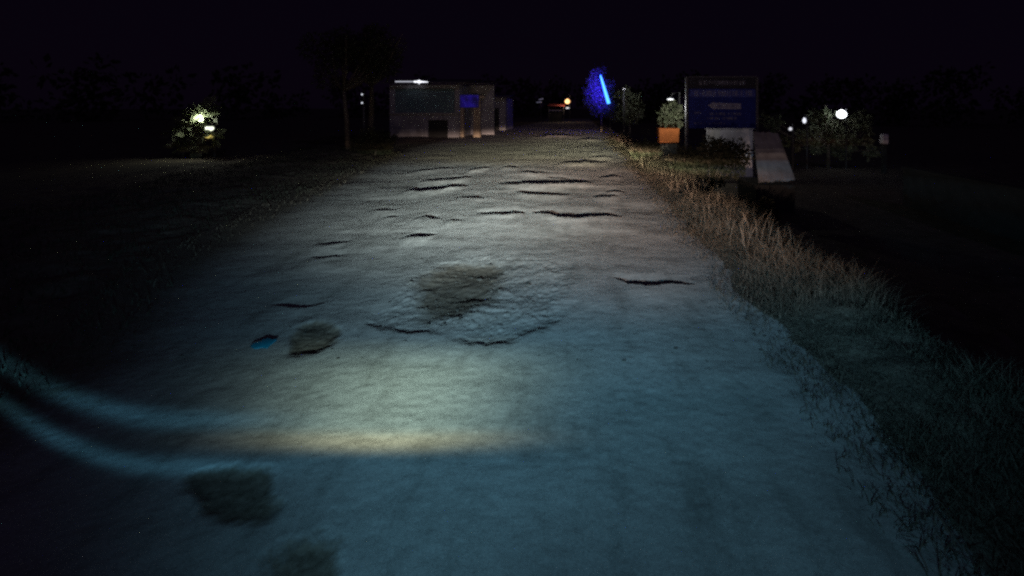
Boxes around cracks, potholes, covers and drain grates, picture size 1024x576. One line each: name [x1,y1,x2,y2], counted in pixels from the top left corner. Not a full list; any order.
pothole [244,517,364,576]
pothole [173,458,295,530]
pothole [360,249,591,346]
pothole [263,315,348,359]
